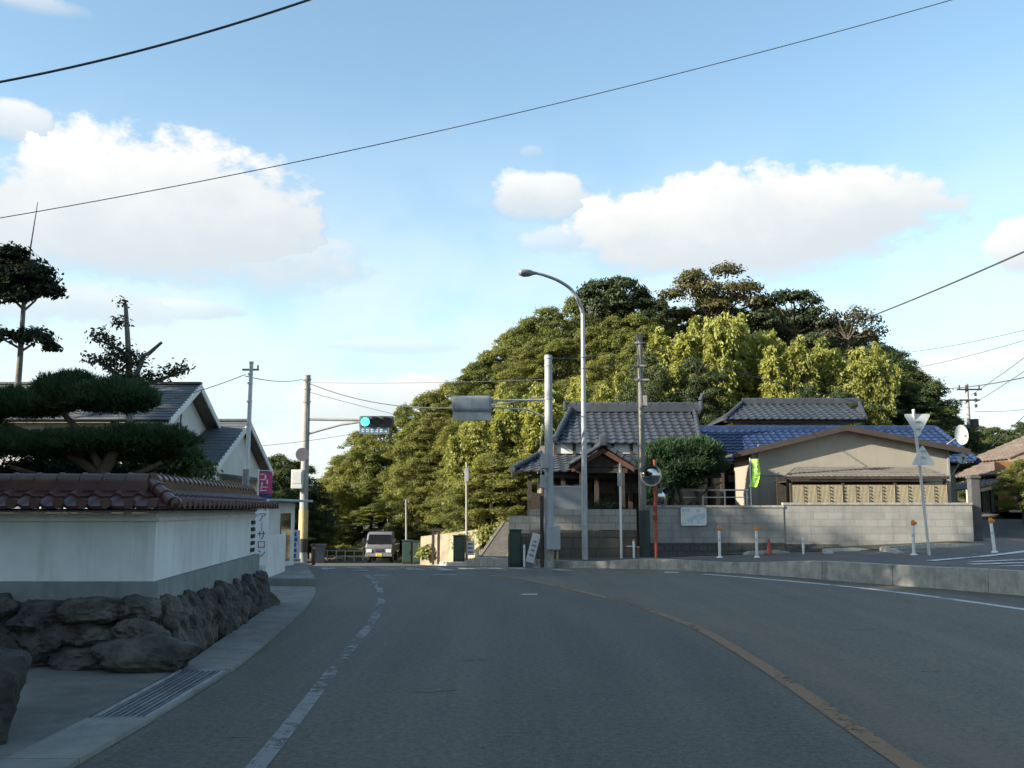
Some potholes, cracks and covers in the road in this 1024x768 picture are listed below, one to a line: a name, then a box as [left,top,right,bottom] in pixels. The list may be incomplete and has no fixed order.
drain grate [91,669,230,722]
